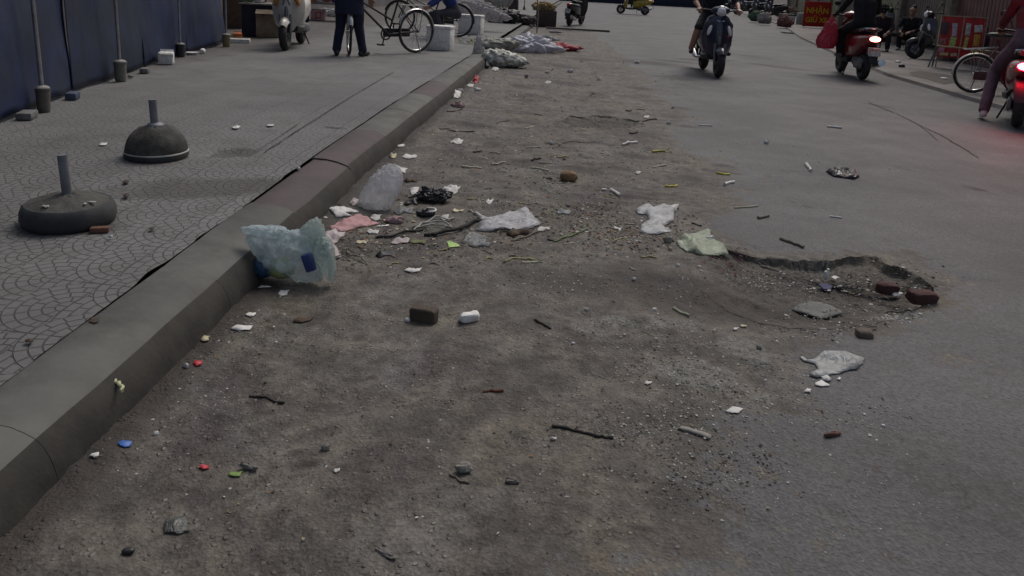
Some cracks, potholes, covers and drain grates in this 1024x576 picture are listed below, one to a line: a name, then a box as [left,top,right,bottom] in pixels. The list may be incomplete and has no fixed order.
crack [869,102,978,158]
pothole [688,250,943,329]
